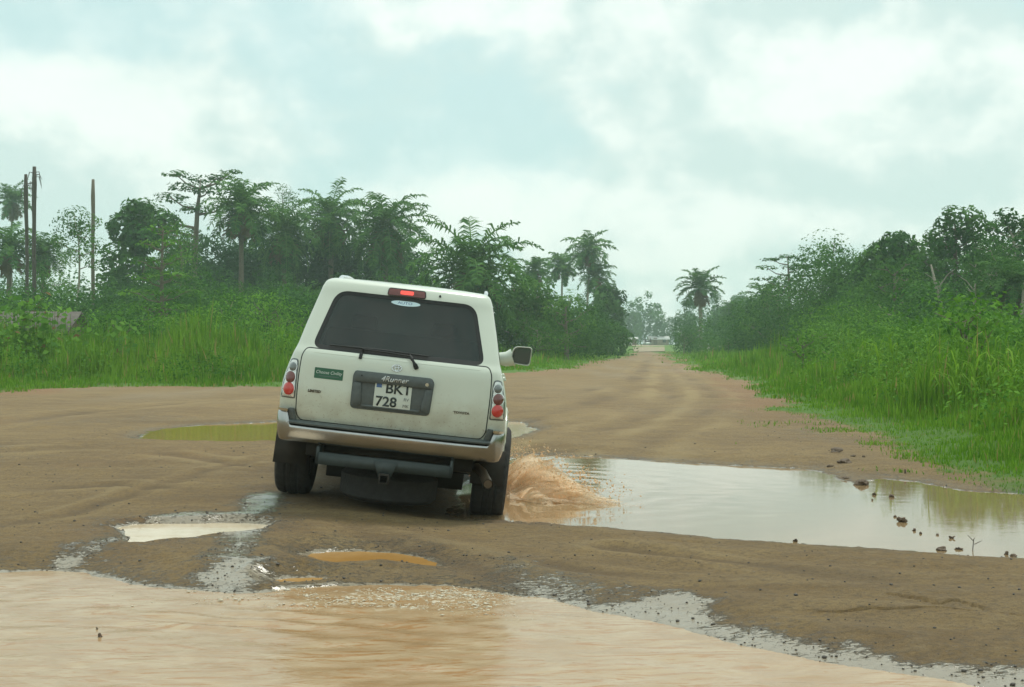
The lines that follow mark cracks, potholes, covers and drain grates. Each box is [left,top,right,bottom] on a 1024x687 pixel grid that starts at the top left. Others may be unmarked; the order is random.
pothole [106,515,280,542]
pothole [0,566,1023,687]
pothole [445,453,1024,558]
pothole [133,420,277,441]
pothole [293,546,445,566]
